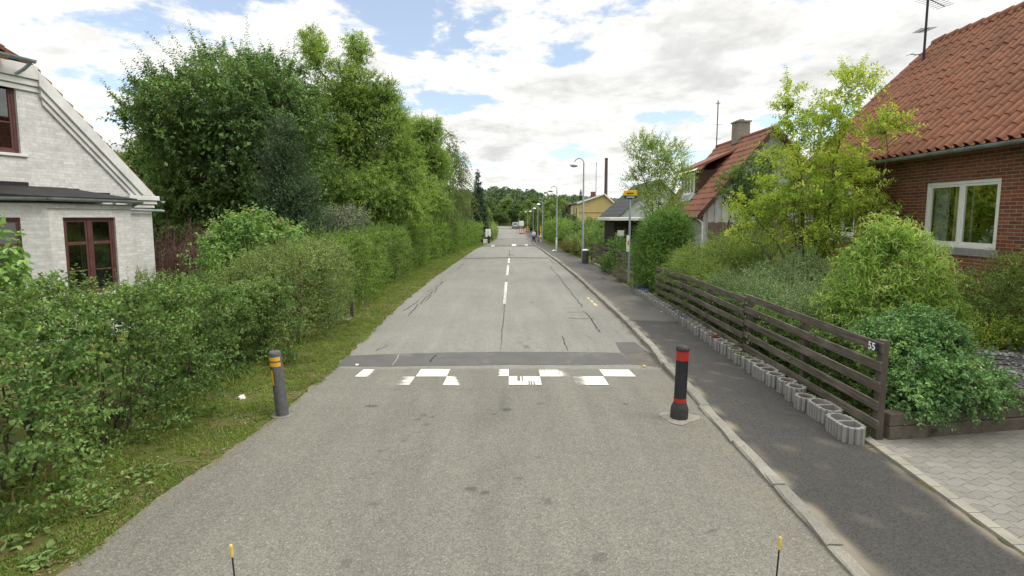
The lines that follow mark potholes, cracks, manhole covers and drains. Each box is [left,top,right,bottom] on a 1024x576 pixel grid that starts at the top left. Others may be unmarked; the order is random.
crack [403,264,463,317]
crack [551,268,602,333]
